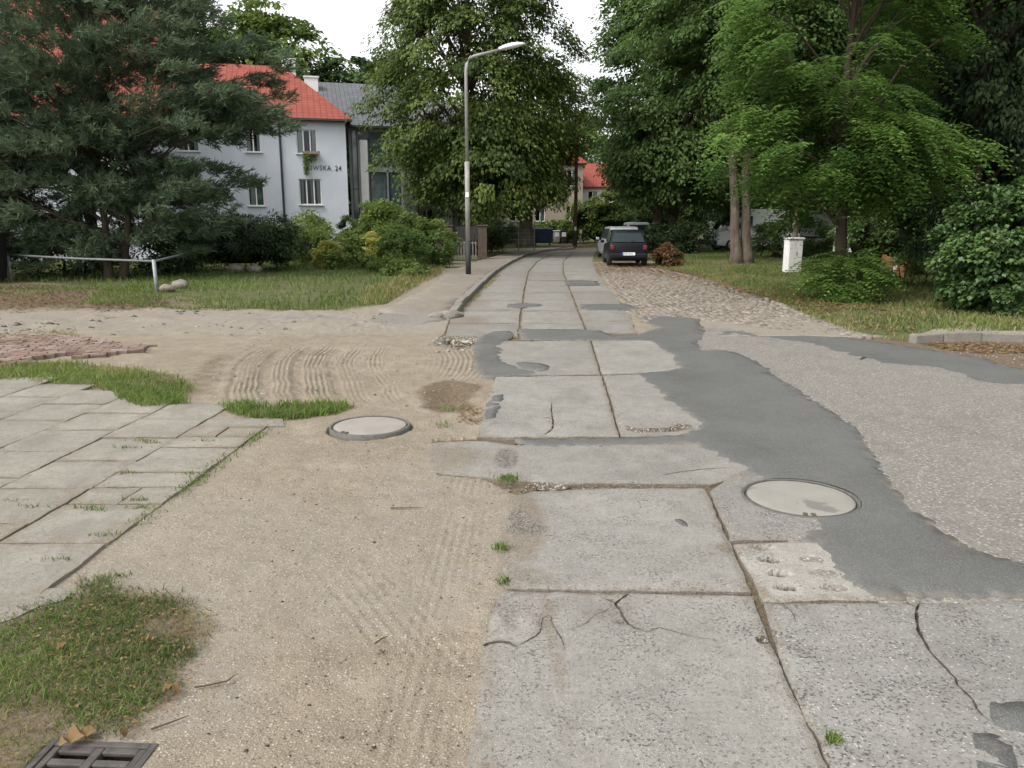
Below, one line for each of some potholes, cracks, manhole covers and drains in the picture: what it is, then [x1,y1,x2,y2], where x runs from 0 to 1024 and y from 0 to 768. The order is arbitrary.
crack [576,593,714,640]
manhole cover [741,479,862,519]
manhole cover [329,415,410,441]
drain grate [25,740,159,768]
crack [906,601,998,726]
crack [484,615,565,648]
